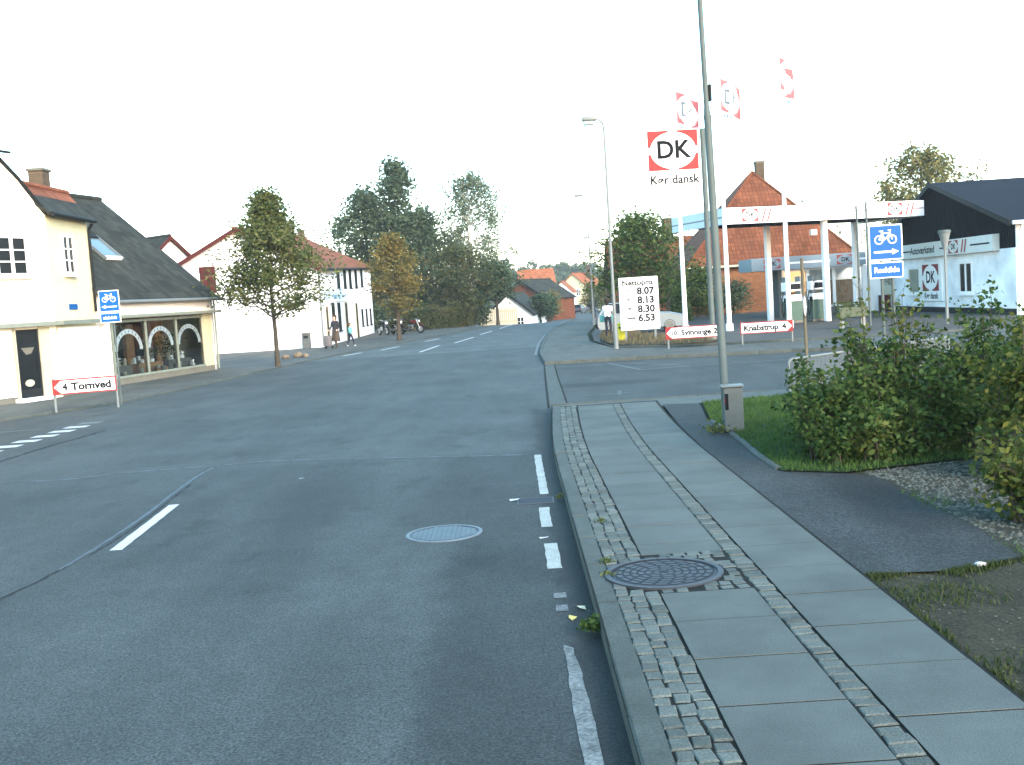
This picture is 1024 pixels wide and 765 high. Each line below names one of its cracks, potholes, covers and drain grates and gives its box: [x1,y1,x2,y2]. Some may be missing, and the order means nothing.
manhole cover [406,524,483,543]
manhole cover [604,557,724,591]
drain grate [517,496,555,505]
